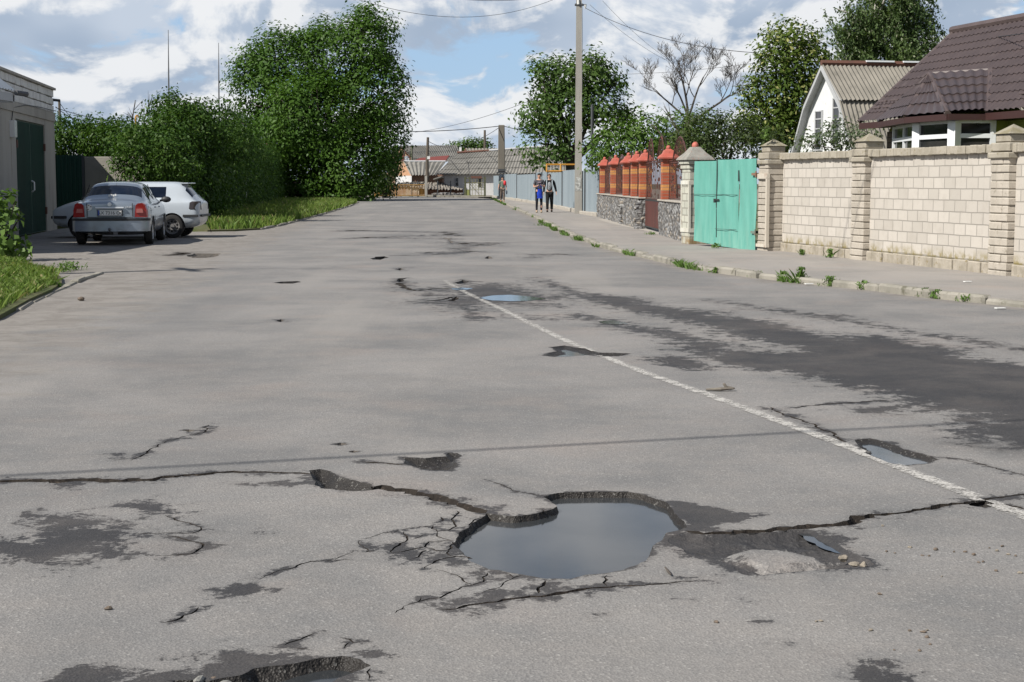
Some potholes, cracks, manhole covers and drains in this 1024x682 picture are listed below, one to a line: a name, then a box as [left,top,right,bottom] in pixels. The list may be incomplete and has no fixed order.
crack [771,400,884,442]
crack [358,480,692,613]
pothole [543,346,631,357]
pothole [402,453,461,470]
pothole [667,529,875,576]
pothole [167,656,370,682]
crack [0,425,311,483]
pothole [453,492,687,579]
pothole [855,438,938,465]
crack [687,494,1024,535]
crack [139,515,221,556]
